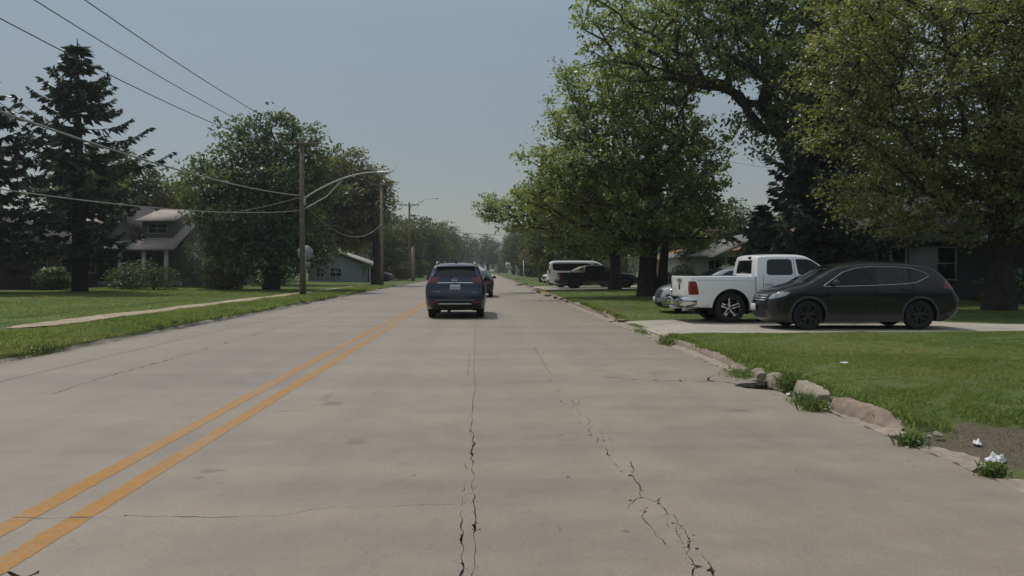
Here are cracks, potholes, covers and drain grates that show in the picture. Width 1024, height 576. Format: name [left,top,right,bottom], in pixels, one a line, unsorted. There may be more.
pothole [735,380,785,394]
crack [534,348,716,576]
